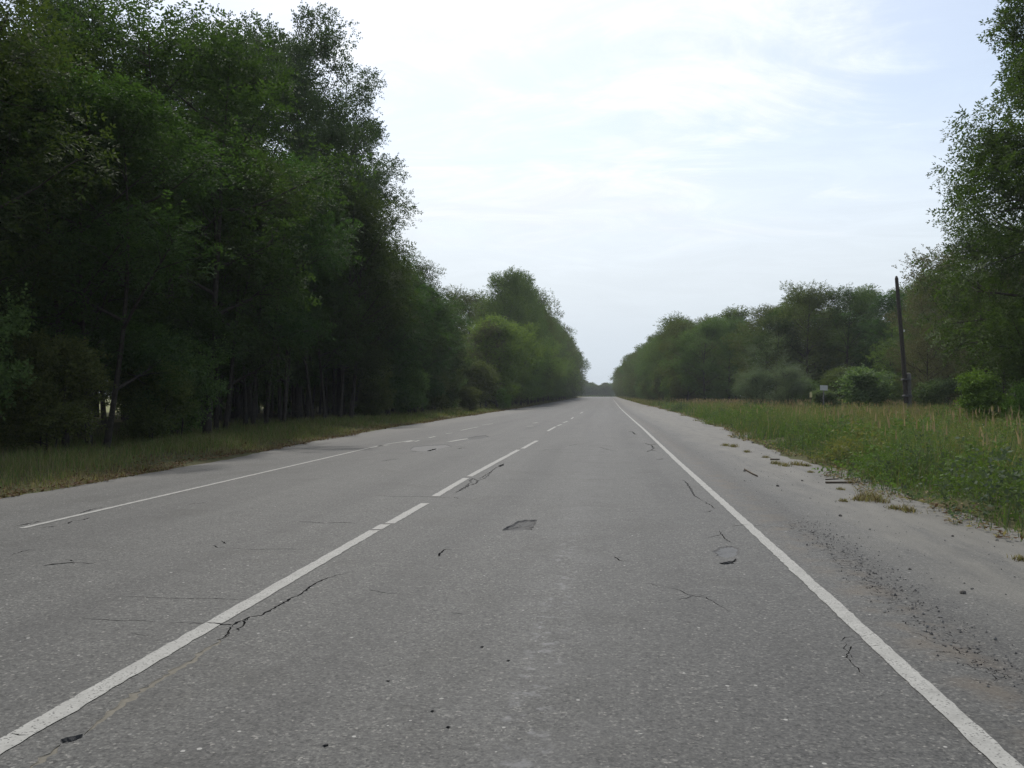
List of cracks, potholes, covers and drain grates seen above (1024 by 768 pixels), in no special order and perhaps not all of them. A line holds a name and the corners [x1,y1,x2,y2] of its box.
pothole [712,546,739,558]
crack [376,465,501,498]
pothole [503,520,537,531]
crack [30,573,345,768]
